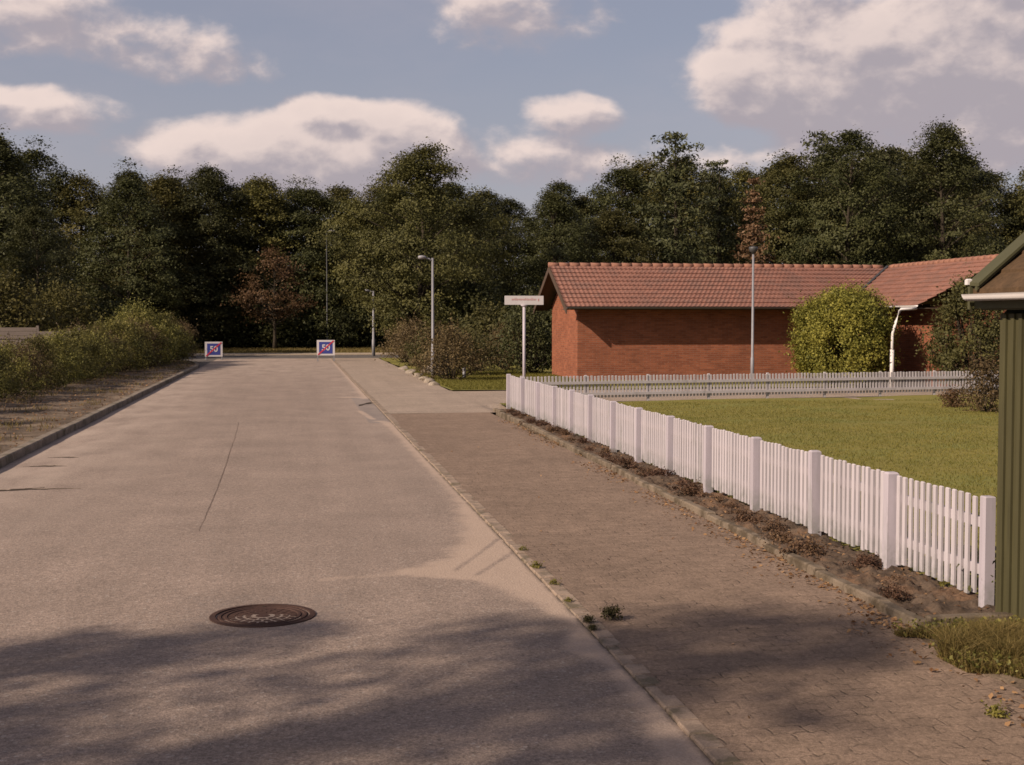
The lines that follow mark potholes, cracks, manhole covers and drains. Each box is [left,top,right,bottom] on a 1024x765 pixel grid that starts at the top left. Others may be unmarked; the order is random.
manhole cover [209,604,316,628]
crack [199,422,239,531]
